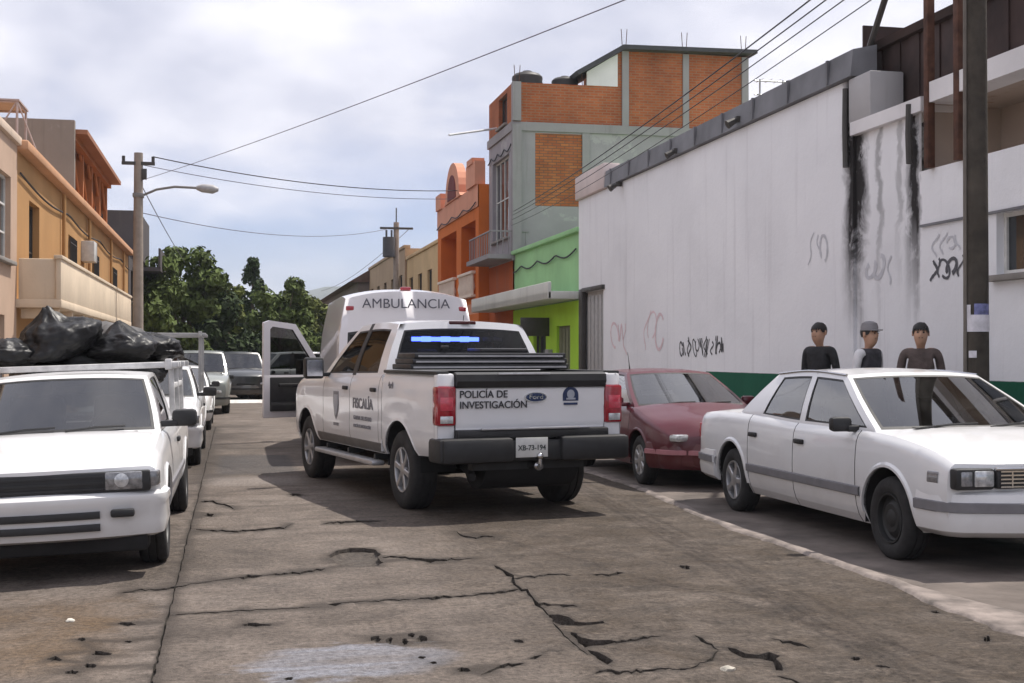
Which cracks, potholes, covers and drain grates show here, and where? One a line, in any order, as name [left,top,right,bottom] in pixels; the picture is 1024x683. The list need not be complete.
crack [481,565,719,675]
crack [196,524,291,533]
pothole [328,548,384,567]
crack [774,639,810,649]
